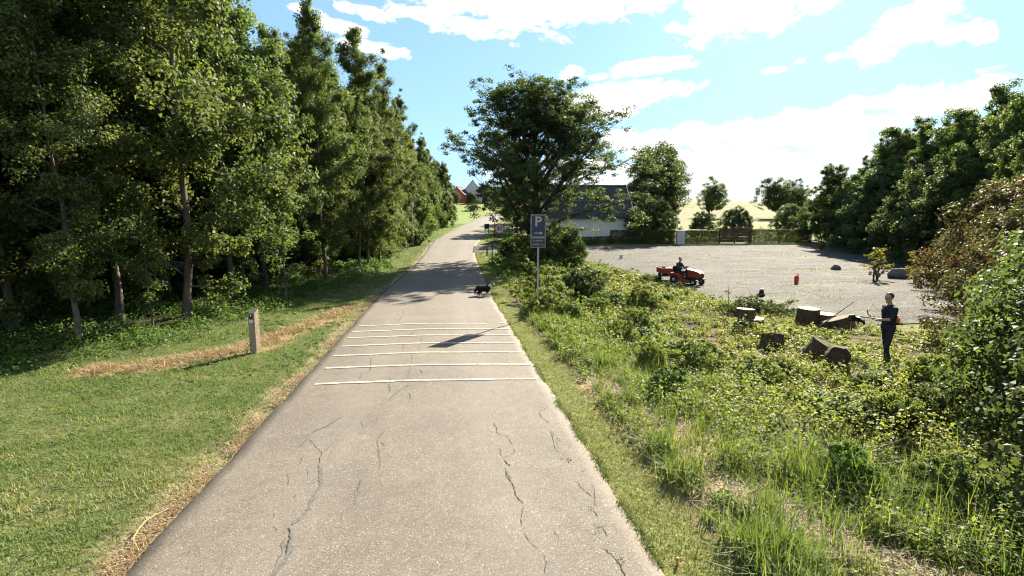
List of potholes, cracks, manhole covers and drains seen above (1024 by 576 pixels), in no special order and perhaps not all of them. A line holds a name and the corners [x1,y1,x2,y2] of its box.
crack [540,414,626,576]
crack [270,417,341,576]
crack [494,424,547,568]
